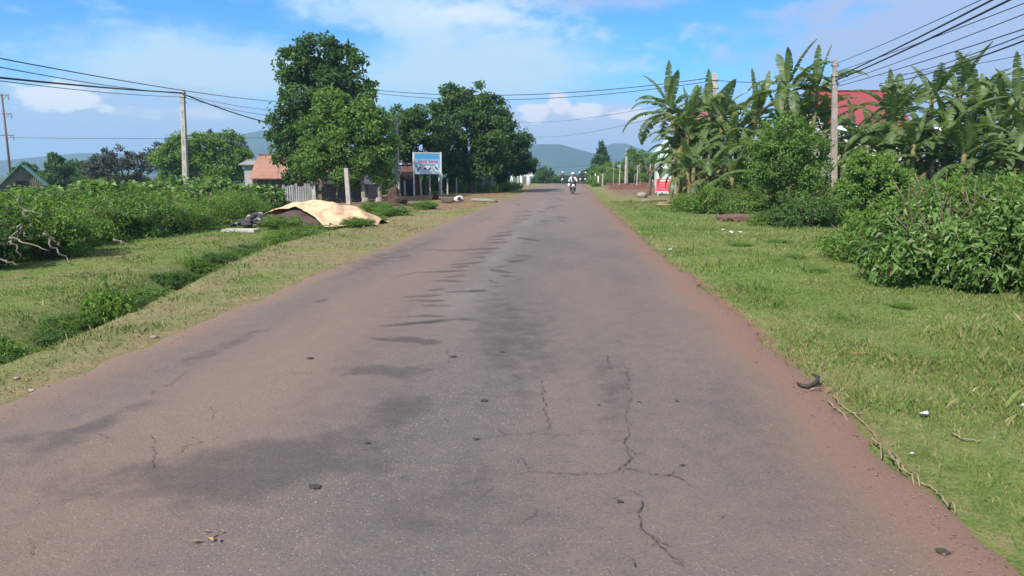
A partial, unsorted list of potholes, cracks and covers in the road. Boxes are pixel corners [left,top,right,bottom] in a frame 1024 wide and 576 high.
crack [472,381,583,438]
crack [616,490,684,567]
crack [517,341,691,486]
